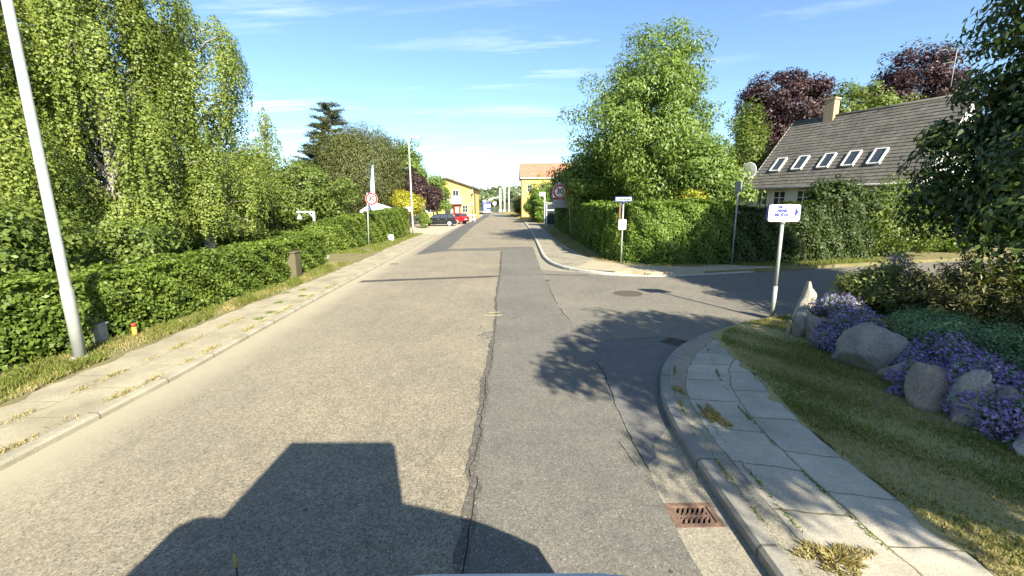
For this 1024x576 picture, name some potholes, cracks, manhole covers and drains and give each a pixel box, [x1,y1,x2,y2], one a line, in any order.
drain grate [663,502,726,528]
crack [596,362,651,472]
drain grate [659,337,687,347]
